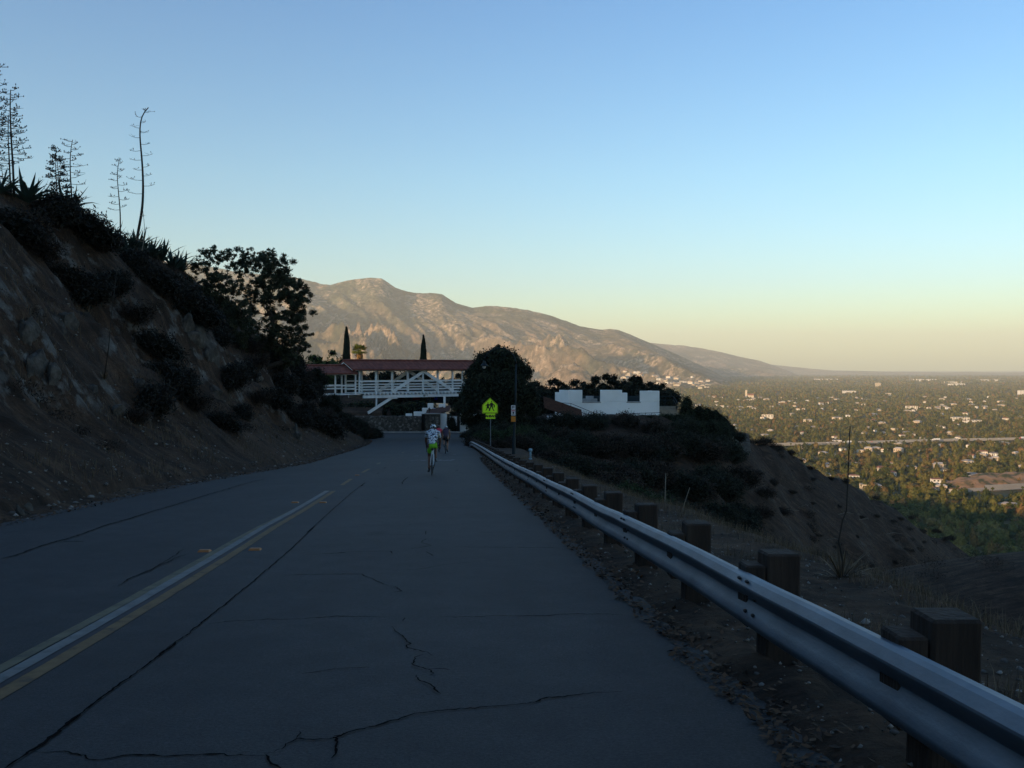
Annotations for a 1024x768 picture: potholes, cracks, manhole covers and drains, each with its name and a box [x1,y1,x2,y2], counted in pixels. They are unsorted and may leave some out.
crack [5,484,622,768]
